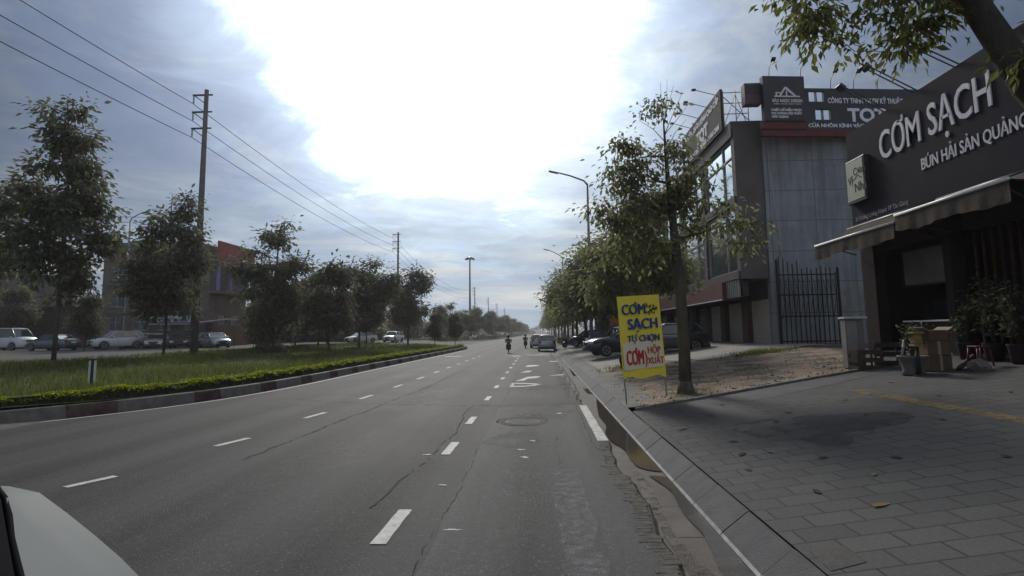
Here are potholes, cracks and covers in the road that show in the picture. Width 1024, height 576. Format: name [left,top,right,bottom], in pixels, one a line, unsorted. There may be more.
crack [412,449,477,576]
crack [369,408,469,507]
manhole cover [496,417,548,426]
